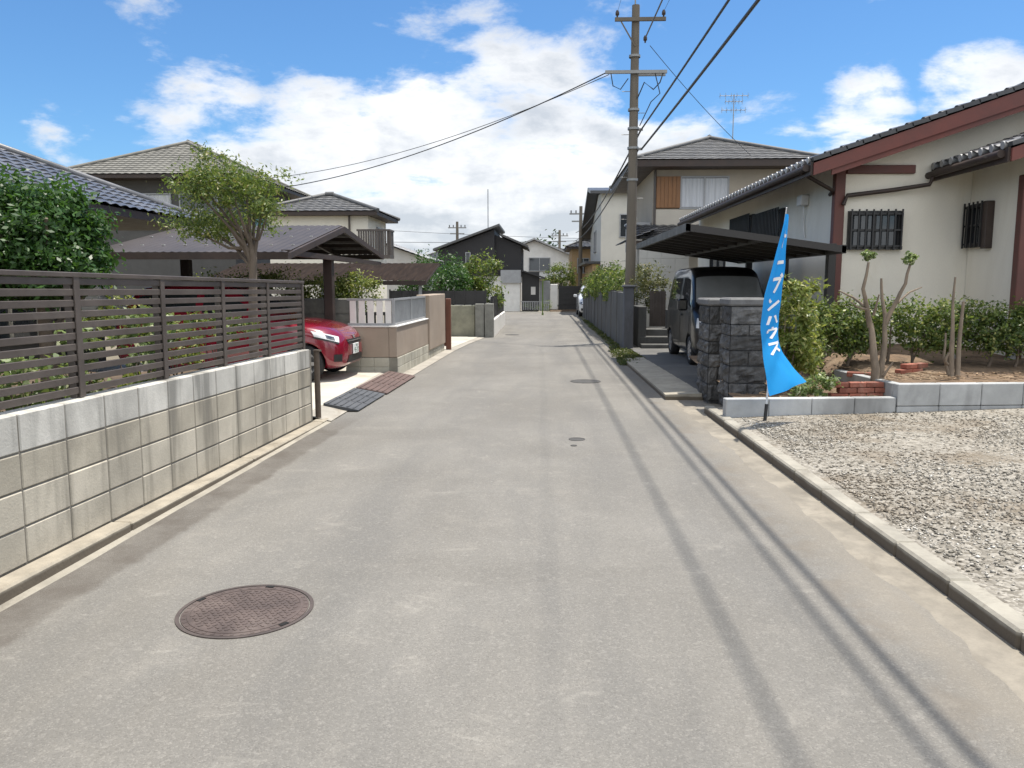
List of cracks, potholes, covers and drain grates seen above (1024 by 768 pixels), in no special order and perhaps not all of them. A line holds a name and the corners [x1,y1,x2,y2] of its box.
manhole cover [175,584,314,639]
